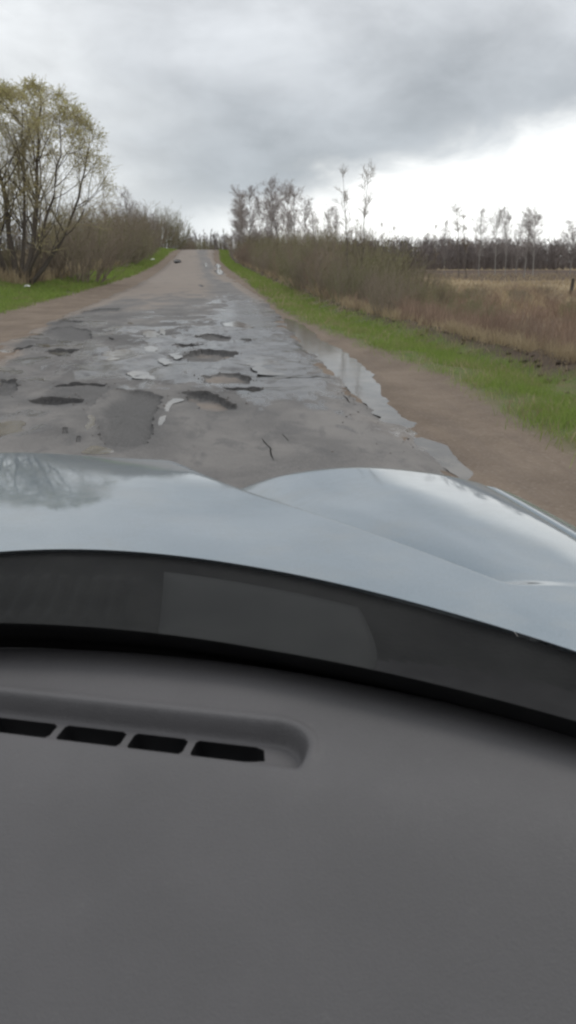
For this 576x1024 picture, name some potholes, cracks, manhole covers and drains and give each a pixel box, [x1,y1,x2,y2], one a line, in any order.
pothole [195,333,231,342]
pothole [183,349,239,362]
pothole [224,386,263,394]
pothole [27,396,85,405]
pothole [200,373,252,384]
pothole [181,391,238,412]
pothole [0,379,19,396]
